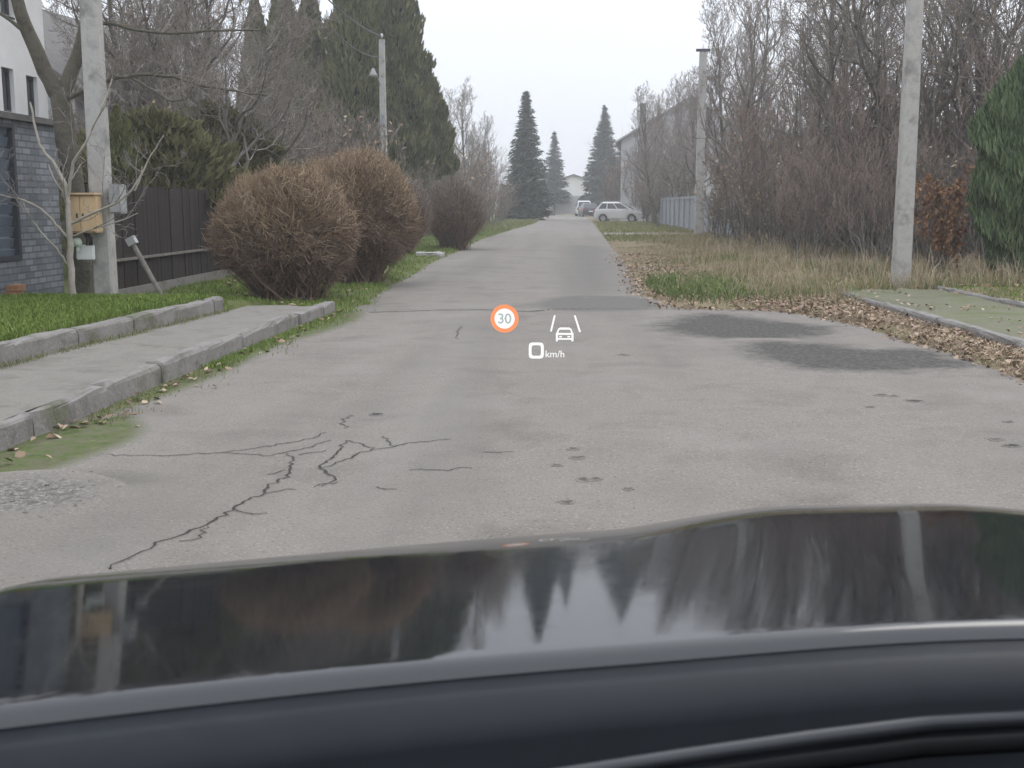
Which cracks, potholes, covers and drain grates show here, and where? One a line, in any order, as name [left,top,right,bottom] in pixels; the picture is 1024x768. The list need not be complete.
crack [100,415,514,568]
